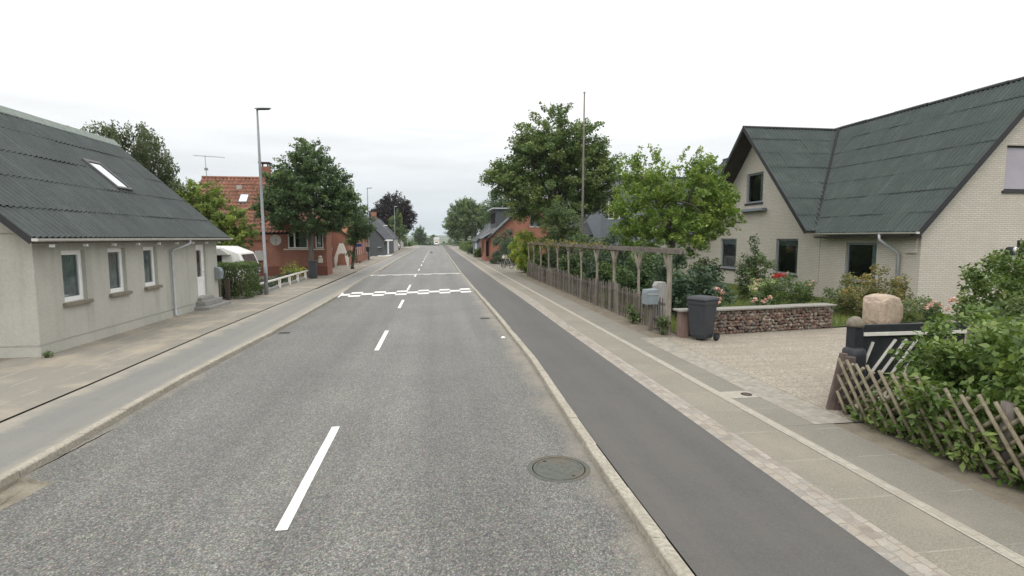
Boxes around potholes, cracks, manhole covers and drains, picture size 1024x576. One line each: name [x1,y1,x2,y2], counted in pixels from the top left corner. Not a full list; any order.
manhole cover [527,455,591,483]
